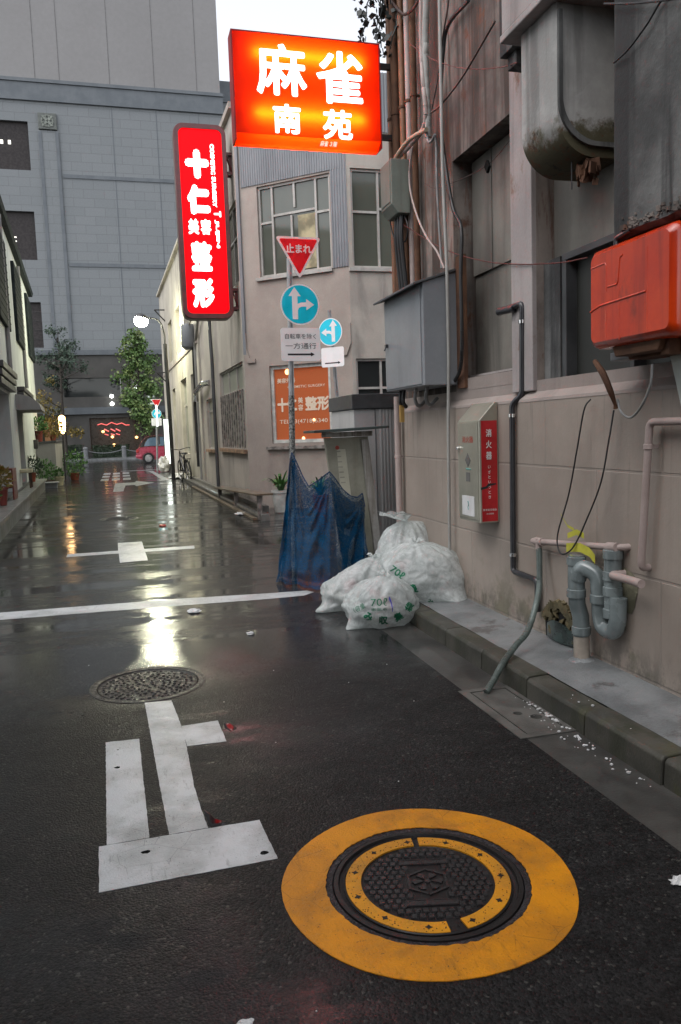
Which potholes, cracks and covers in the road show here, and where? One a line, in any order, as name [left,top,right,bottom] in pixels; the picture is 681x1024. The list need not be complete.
manhole cover [326,828,531,946]
manhole cover [89,666,206,704]
